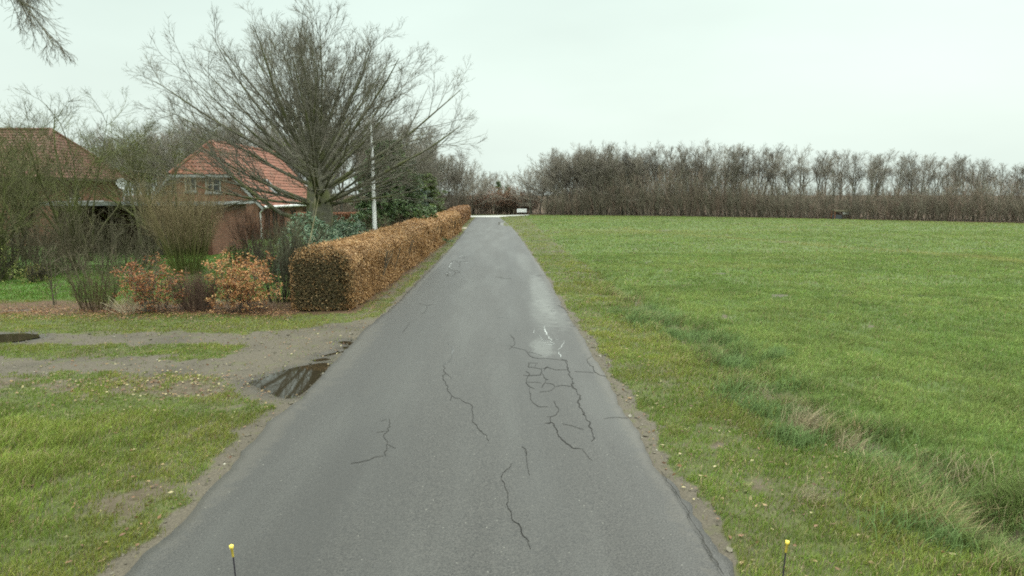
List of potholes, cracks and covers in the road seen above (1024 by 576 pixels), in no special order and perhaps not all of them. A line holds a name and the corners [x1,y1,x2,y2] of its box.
crack [442,345,486,435]
crack [503,317,607,455]
crack [501,447,531,549]
